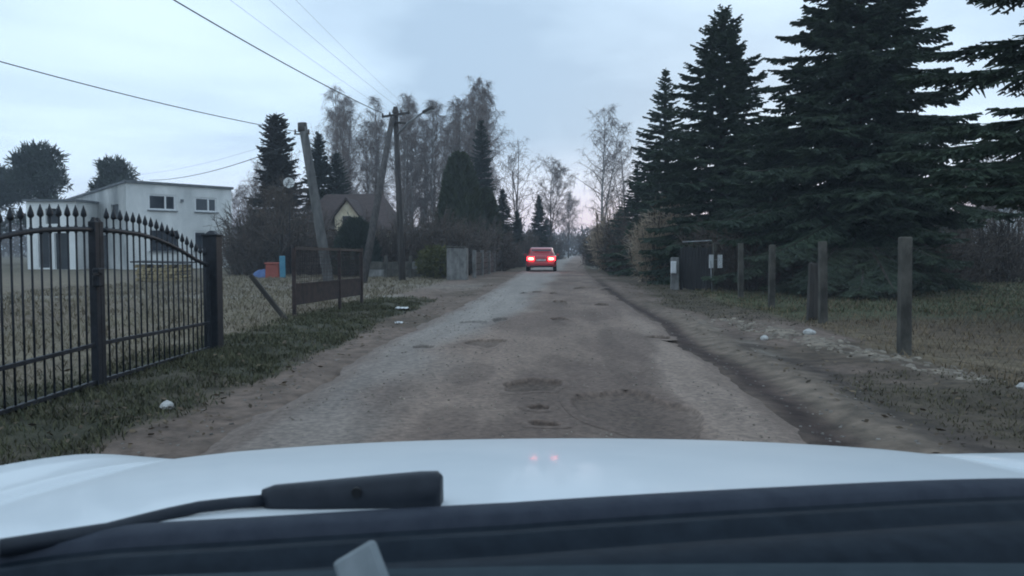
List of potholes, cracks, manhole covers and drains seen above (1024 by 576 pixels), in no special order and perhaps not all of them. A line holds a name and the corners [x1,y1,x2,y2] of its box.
pothole [487,316,511,325]
pothole [516,417,573,429]
pothole [517,402,558,412]
pothole [493,376,572,394]
pothole [458,338,514,350]
